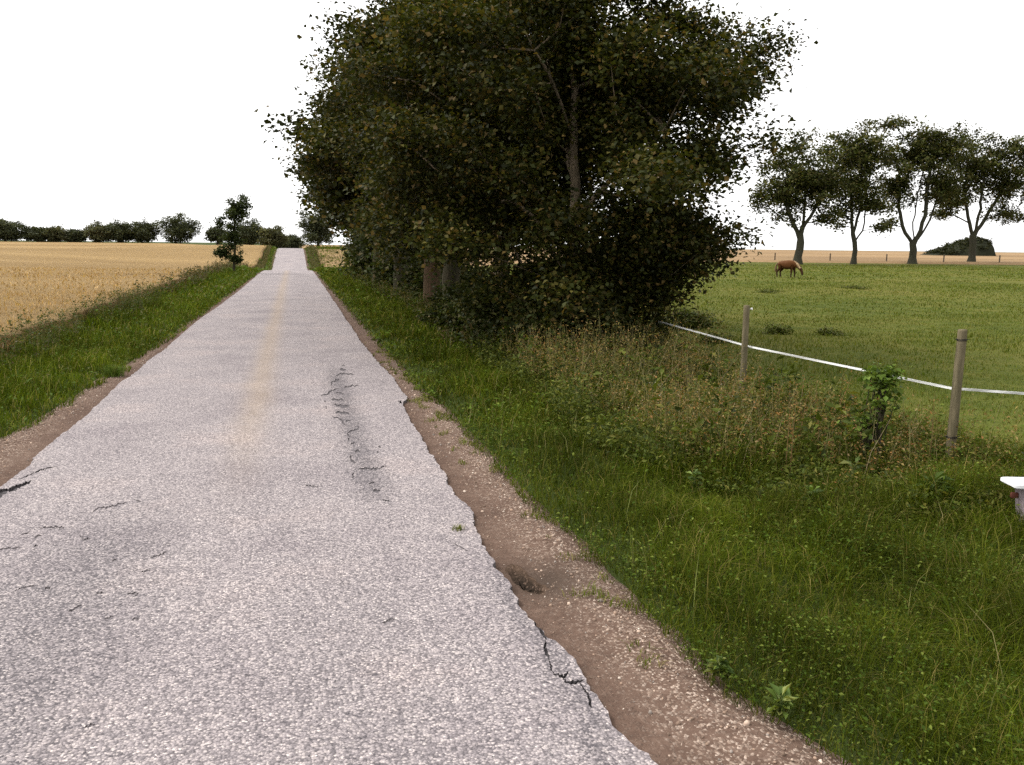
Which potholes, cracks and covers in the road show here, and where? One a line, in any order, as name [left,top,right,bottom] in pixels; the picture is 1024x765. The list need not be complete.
crack [511,586,592,709]
crack [93,500,141,512]
crack [0,526,90,550]
